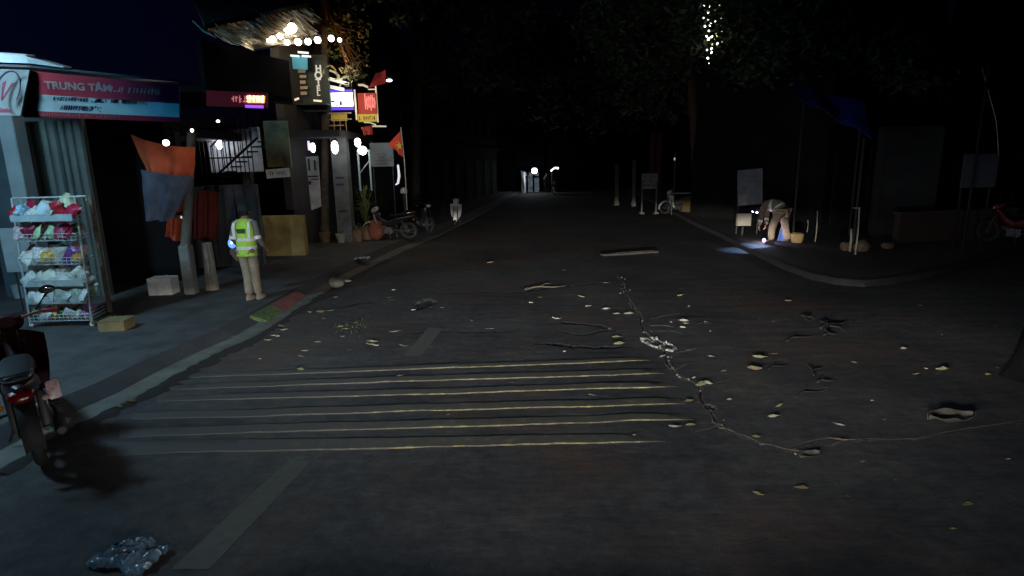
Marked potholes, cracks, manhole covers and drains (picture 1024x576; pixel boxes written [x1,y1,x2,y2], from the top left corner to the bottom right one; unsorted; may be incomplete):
crack [394,274,1024,455]
